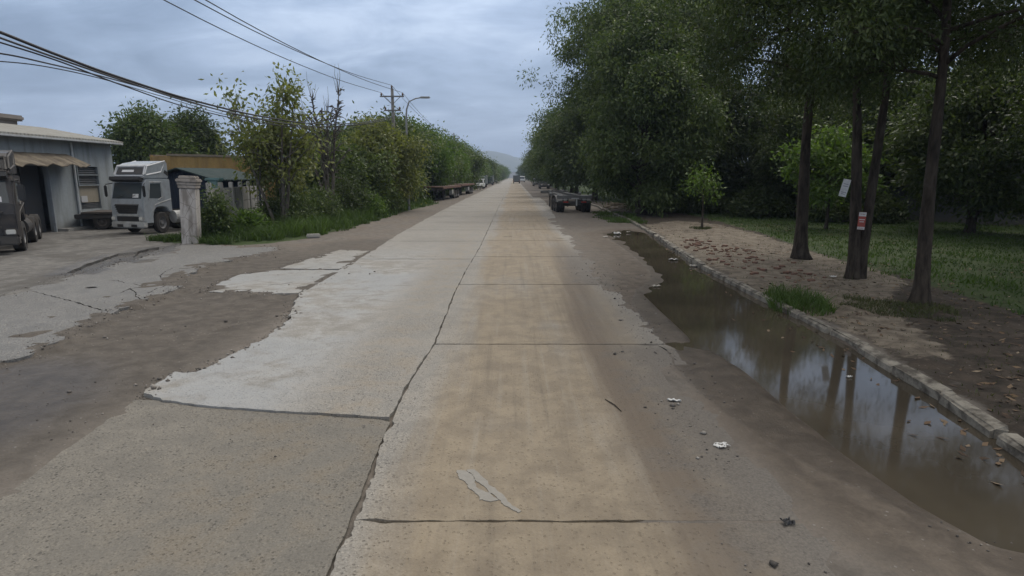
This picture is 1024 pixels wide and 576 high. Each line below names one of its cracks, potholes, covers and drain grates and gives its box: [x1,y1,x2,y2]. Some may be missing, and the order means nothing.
pothole [67,247,159,273]
